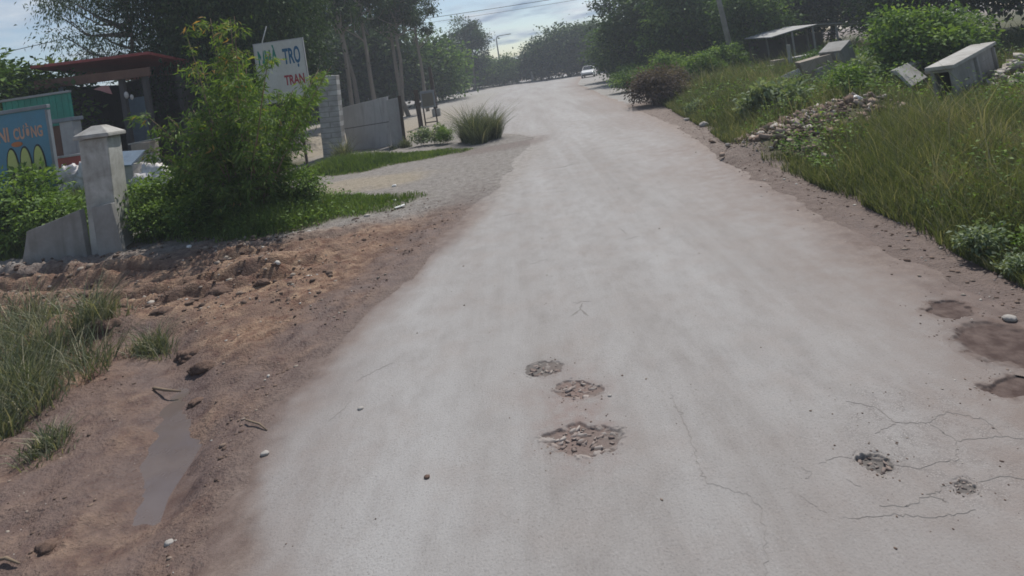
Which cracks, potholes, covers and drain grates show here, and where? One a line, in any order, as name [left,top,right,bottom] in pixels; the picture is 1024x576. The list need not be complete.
pothole [522,358,569,379]
pothole [528,418,640,464]
pothole [547,378,608,401]
pothole [950,477,983,498]
pothole [940,315,1024,377]
pothole [849,450,899,476]
crack [670,397,769,574]
pothole [915,298,981,321]
pothole [968,368,1024,404]
crack [801,401,1024,519]
